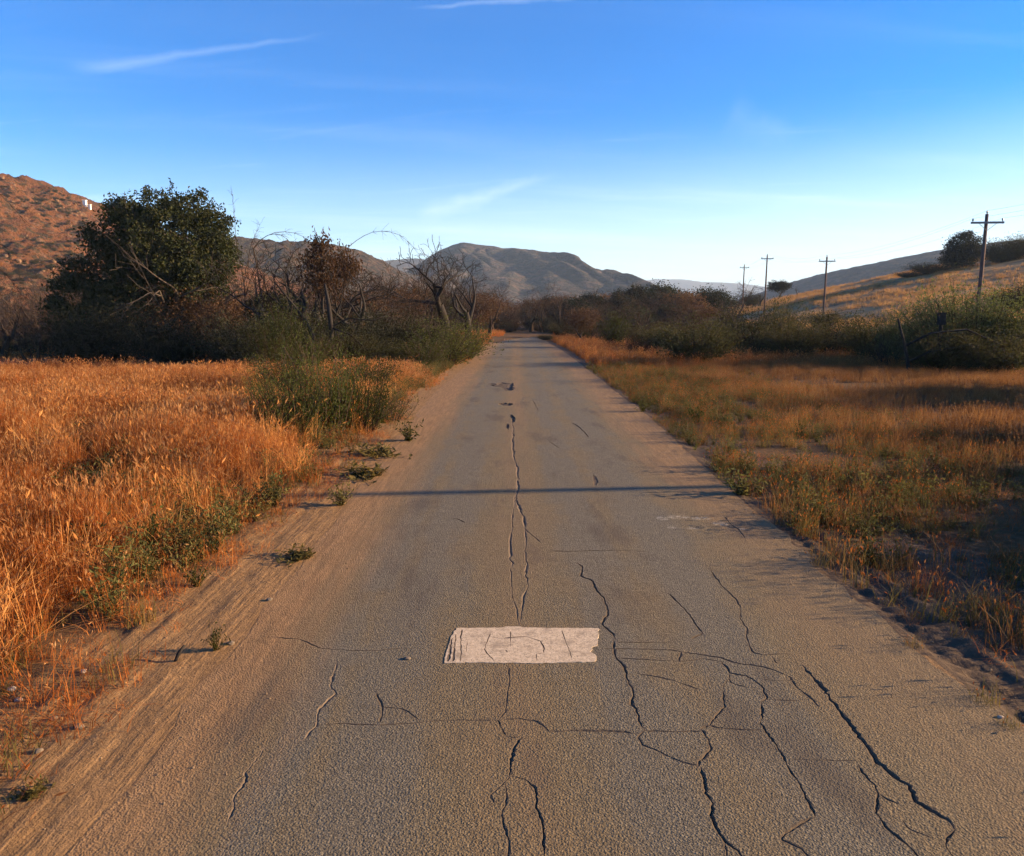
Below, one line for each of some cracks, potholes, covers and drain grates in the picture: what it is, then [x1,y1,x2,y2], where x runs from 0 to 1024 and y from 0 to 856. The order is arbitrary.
pothole [489,382,515,391]
crack [227,747,266,823]
crack [278,402,957,856]
